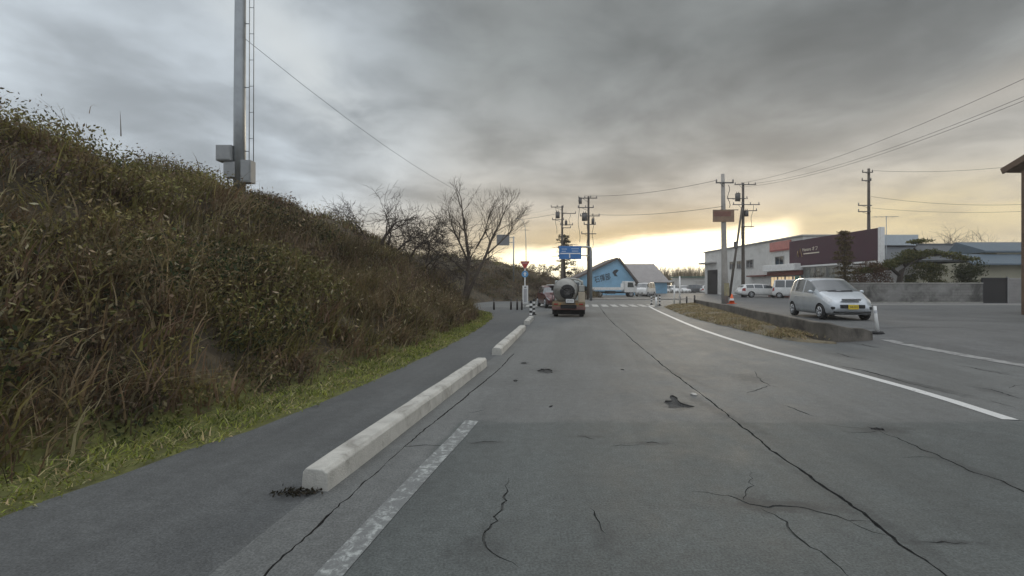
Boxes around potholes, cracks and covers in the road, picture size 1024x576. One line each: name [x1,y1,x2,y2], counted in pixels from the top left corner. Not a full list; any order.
crack [692,470,885,576]
pothole [664,395,695,408]
crack [835,425,1024,492]
